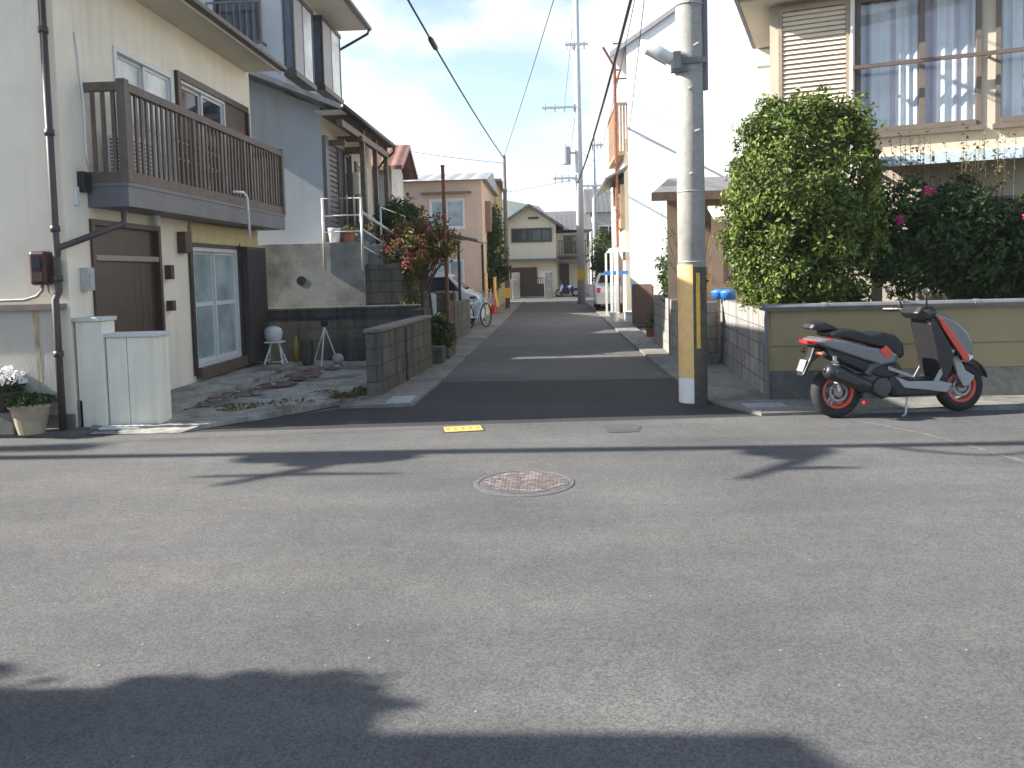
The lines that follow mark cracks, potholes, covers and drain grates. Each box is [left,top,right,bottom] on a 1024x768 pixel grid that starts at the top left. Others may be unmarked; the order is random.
manhole cover [474,470,575,497]
